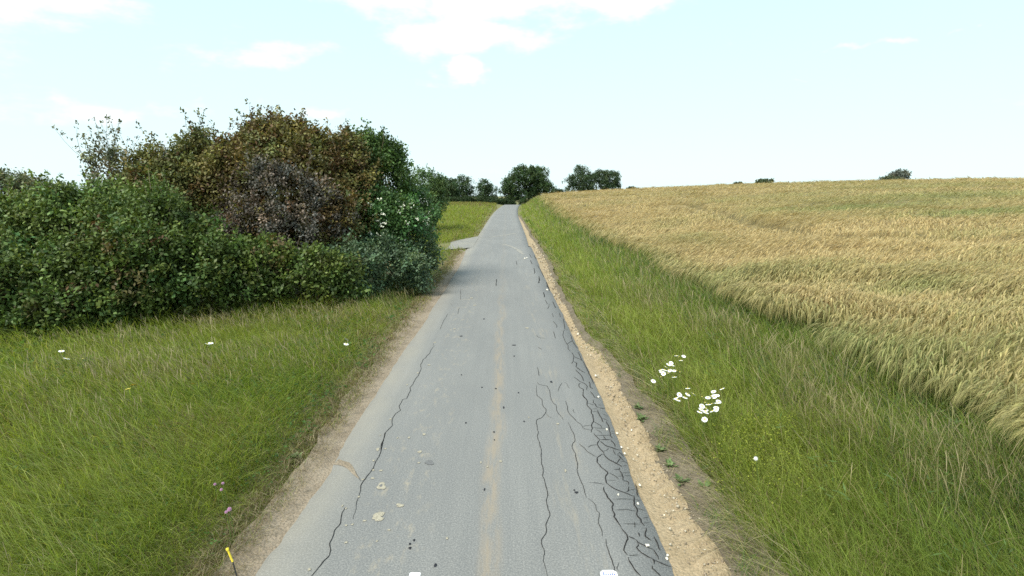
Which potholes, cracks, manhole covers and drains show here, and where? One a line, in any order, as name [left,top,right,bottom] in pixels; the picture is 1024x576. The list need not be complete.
crack [311,343,434,576]
crack [516,254,671,576]
